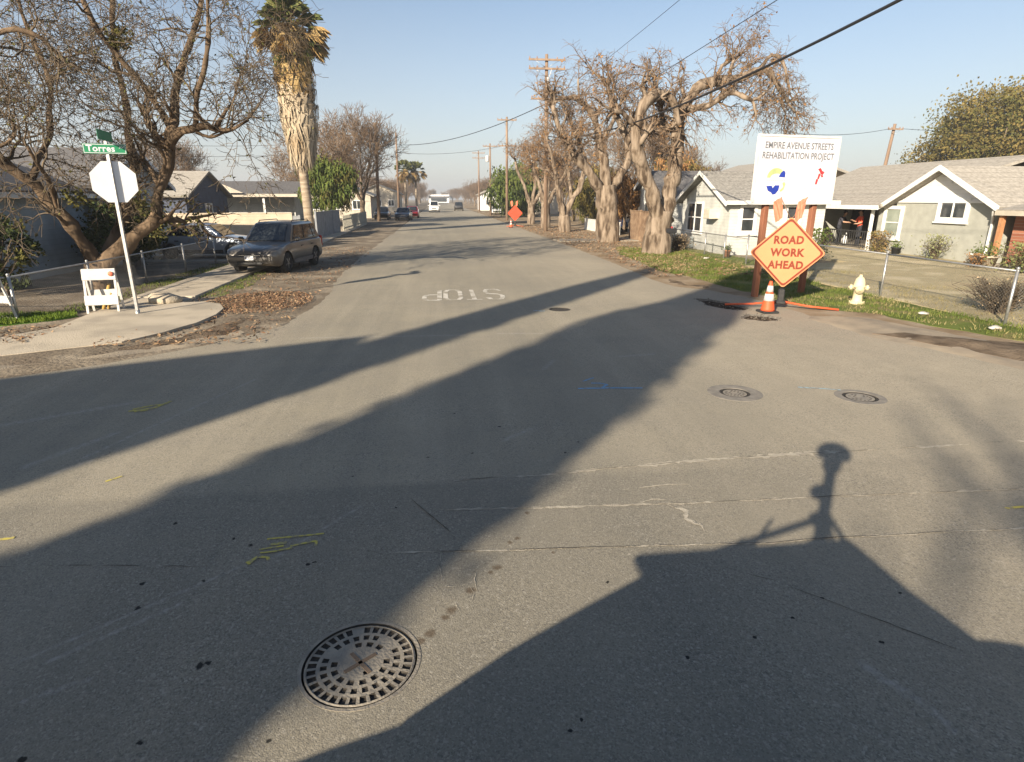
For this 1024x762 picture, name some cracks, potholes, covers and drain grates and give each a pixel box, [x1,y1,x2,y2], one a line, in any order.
pothole [738,313,781,321]
manhole cover [707,385,763,401]
manhole cover [297,621,421,712]
pothole [695,298,752,311]
manhole cover [834,389,888,405]
crack [395,484,1024,613]
